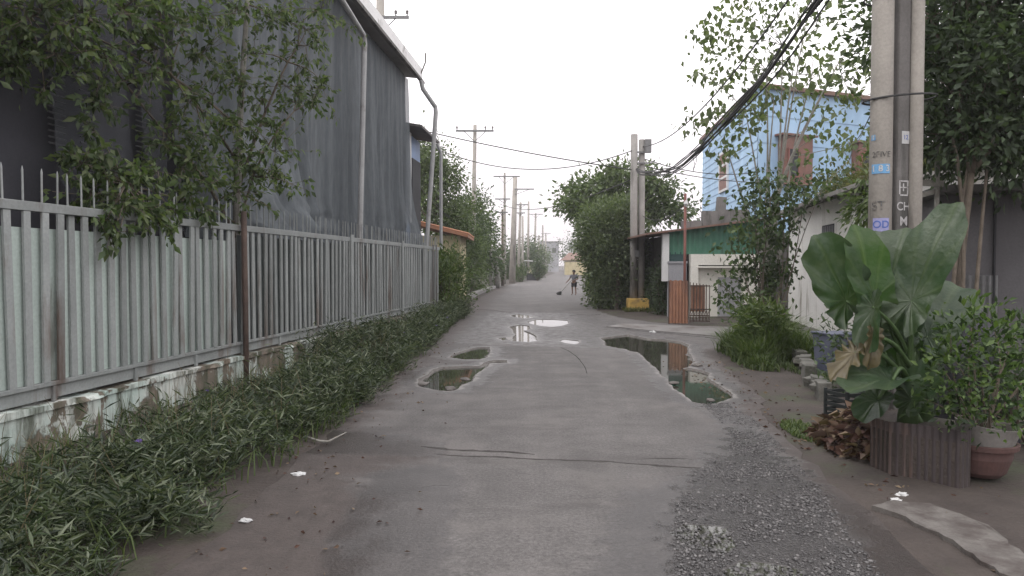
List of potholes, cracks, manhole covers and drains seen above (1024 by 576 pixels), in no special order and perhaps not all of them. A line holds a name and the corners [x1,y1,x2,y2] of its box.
pothole [510,325,538,342]
crack [421,446,709,469]
pothole [528,319,569,327]
pothole [449,347,491,359]
pothole [601,334,733,404]
pothole [418,360,507,391]
